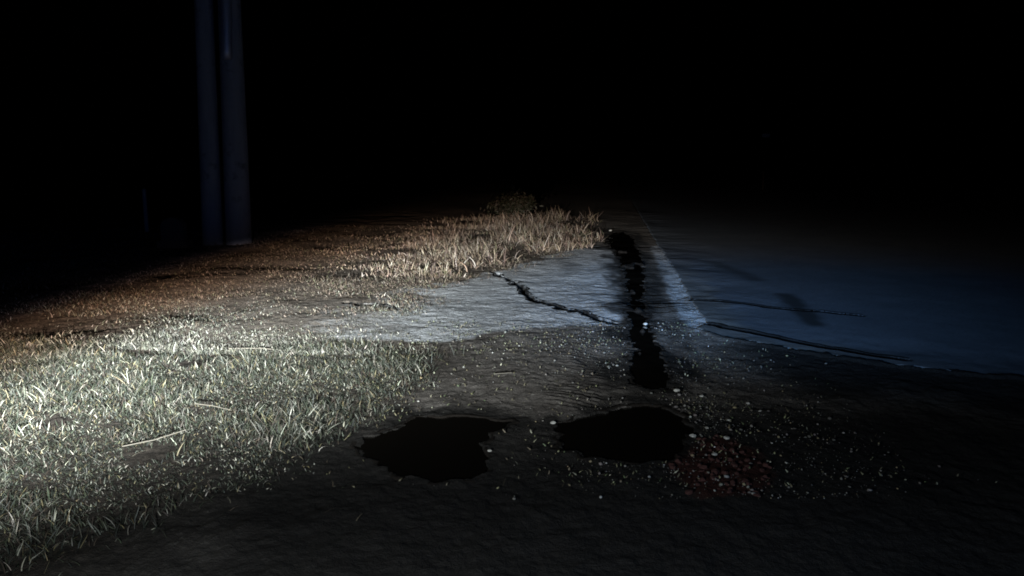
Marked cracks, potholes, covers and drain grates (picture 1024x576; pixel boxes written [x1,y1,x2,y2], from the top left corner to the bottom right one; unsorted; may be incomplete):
crack [689,298,909,361]
pothole [349,414,521,485]
crack [492,273,617,324]
pothole [552,403,699,465]
